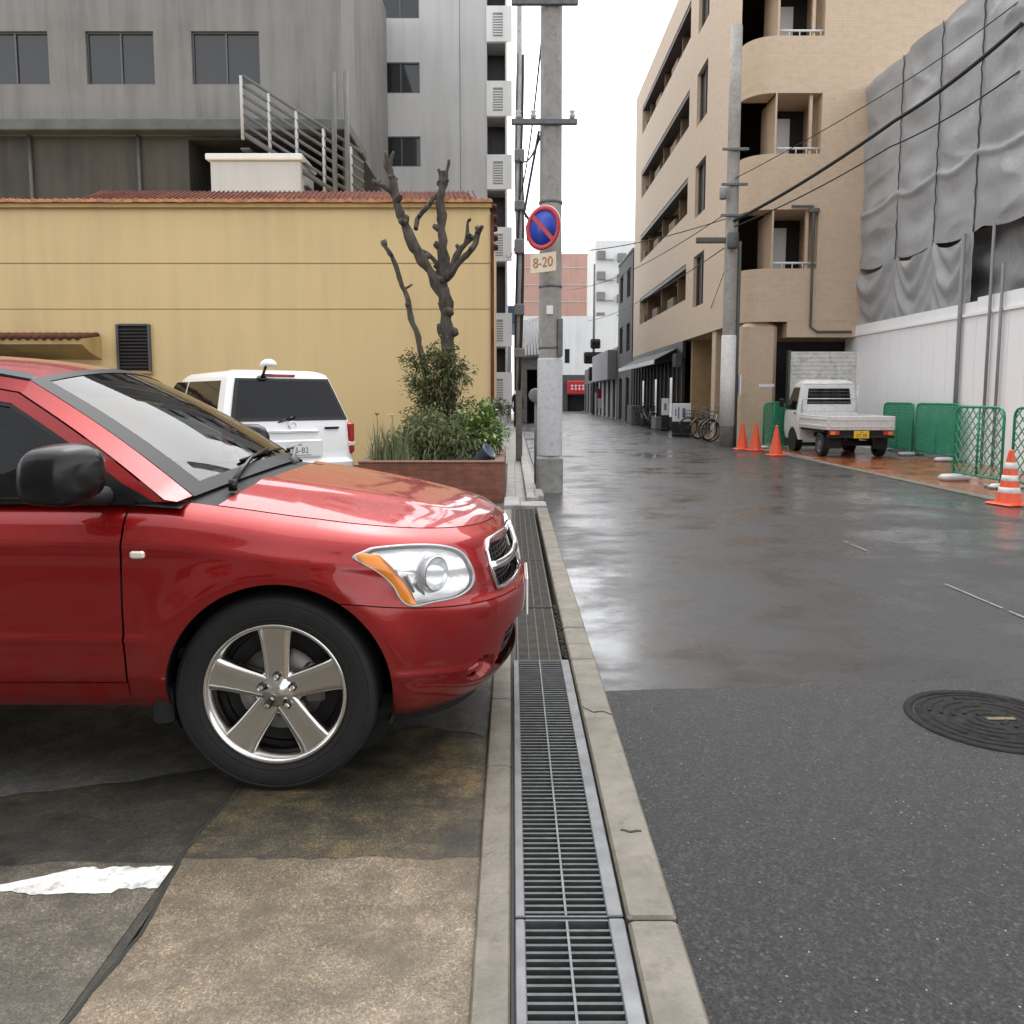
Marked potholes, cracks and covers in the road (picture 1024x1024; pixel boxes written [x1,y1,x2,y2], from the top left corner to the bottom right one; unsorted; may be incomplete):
manhole cover [903,690,1024,755]
drain grate [516,608,562,661]
drain grate [514,530,543,560]
drain grate [516,560,552,608]
drain grate [515,919,646,1024]
drain grate [514,509,537,530]
drain grate [514,660,623,920]
